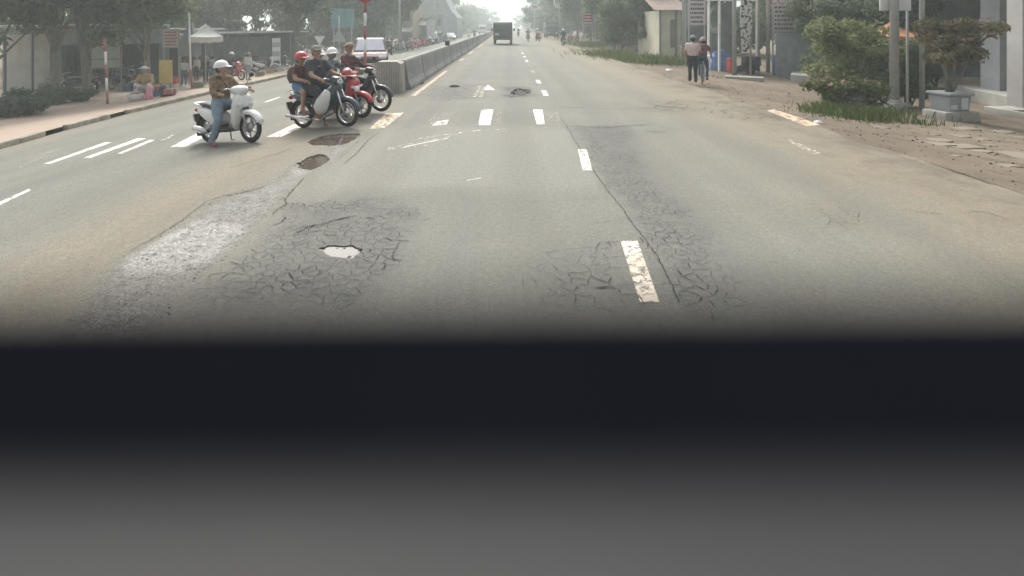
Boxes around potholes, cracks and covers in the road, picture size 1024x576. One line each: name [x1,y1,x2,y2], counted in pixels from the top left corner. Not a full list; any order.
pothole [307,133,361,146]
pothole [319,245,362,258]
crack [527,100,780,296]
crack [189,196,430,299]
pothole [296,154,330,170]
